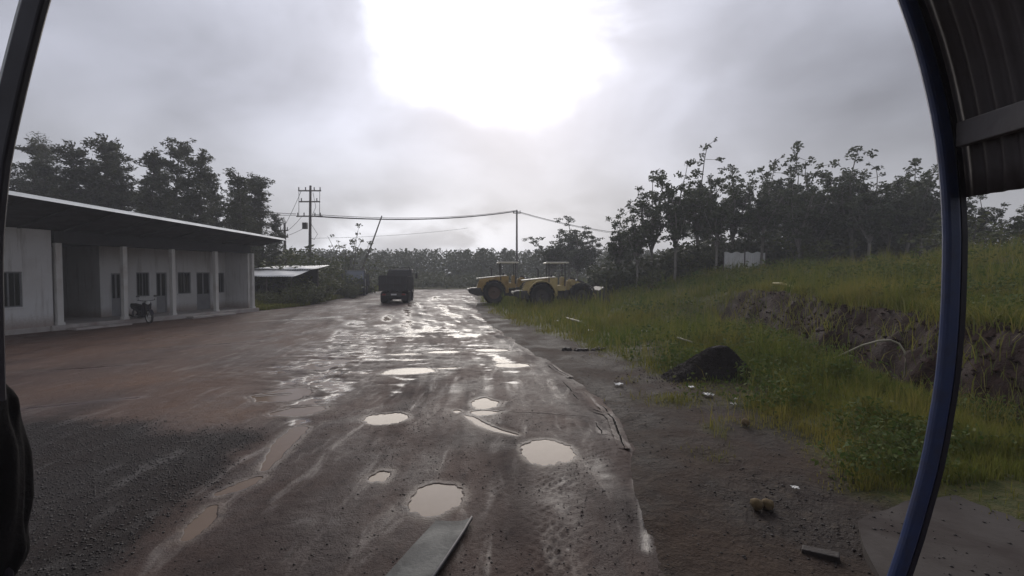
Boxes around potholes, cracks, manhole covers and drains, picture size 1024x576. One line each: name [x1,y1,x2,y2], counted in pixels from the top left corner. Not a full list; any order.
pothole [253,425,314,474]
pothole [376,366,439,376]
crack [503,364,631,449]
pothole [357,411,414,426]
pothole [466,396,504,411]
pothole [169,501,227,546]
pothole [360,468,398,485]
pothole [398,480,472,521]
pothole [515,437,583,468]
